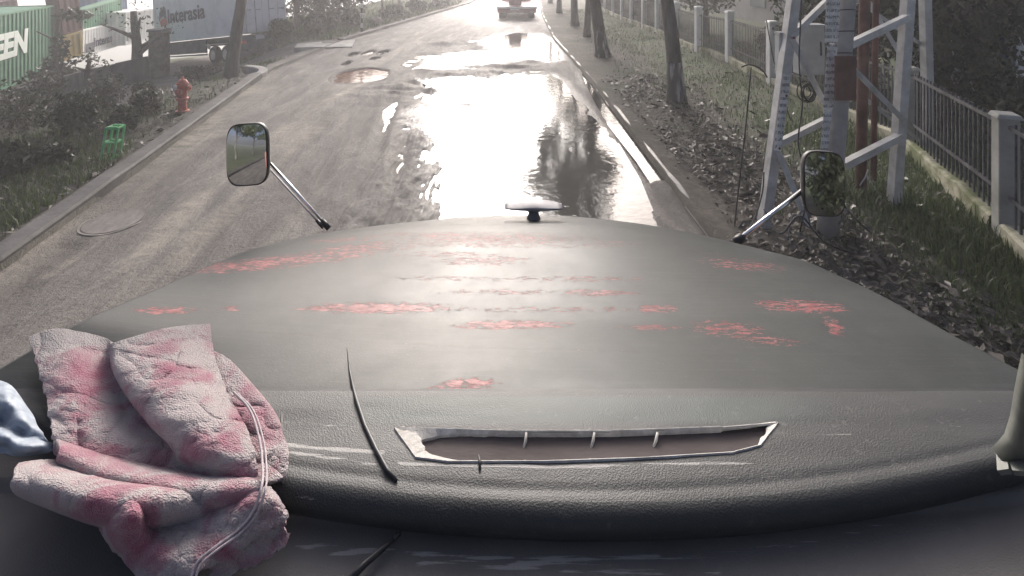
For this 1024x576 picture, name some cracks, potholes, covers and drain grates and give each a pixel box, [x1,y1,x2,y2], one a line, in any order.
manhole cover [77,209,144,236]
pothole [328,66,394,85]
